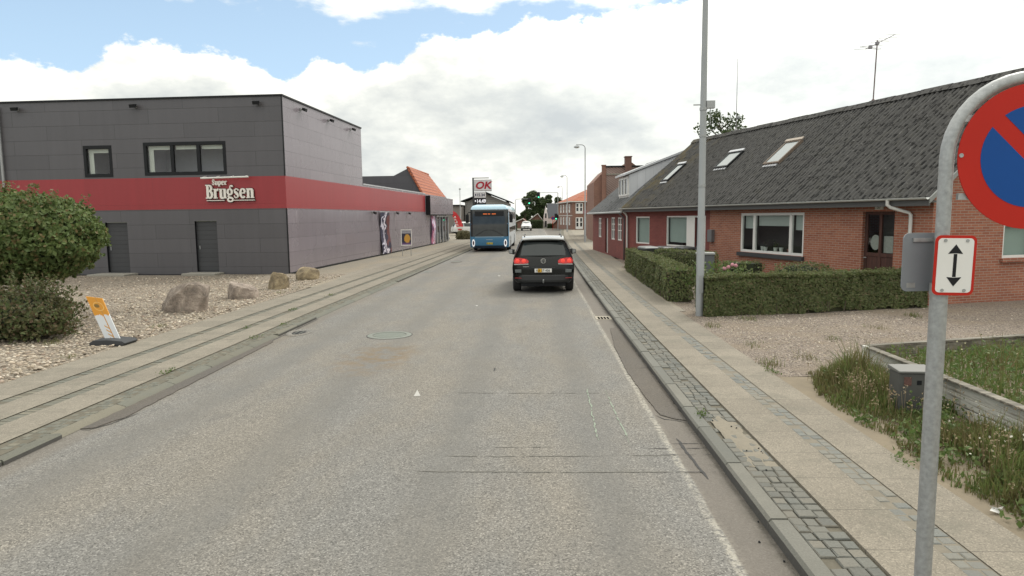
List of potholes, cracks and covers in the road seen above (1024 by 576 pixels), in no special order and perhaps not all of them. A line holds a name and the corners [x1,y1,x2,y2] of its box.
manhole cover [366,331,413,339]
